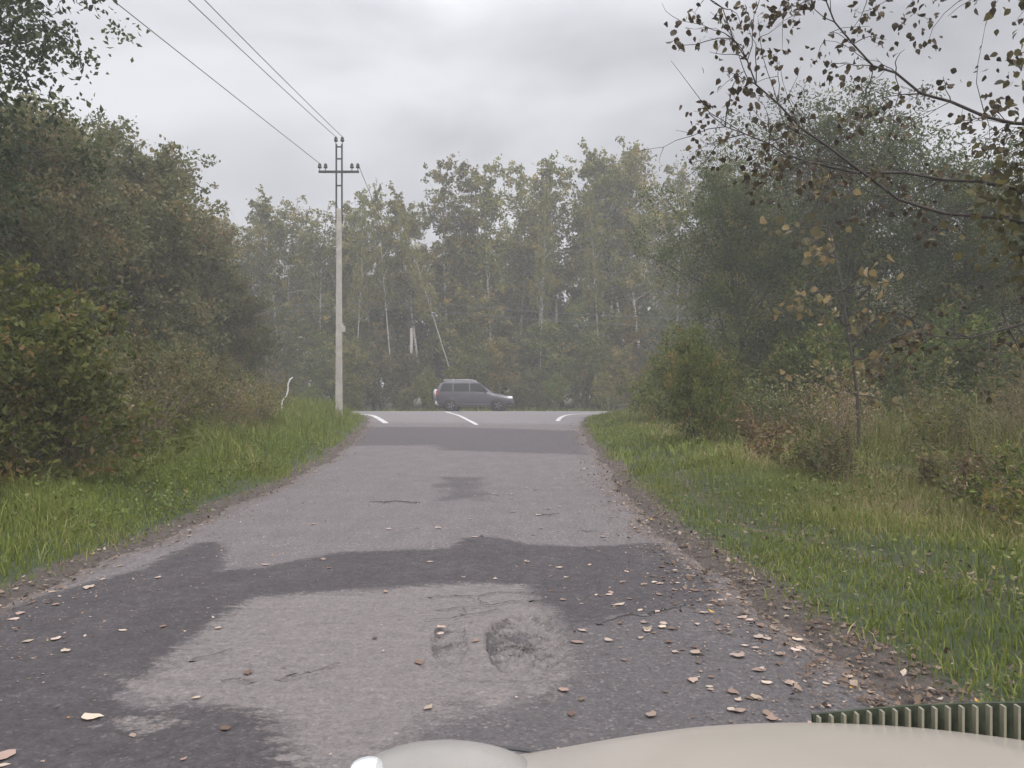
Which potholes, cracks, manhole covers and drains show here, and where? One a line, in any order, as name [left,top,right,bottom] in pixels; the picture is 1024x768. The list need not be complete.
pothole [474,609,582,681]
crack [185,647,339,685]
pothole [419,620,477,674]
crack [595,603,691,625]
crack [422,590,539,622]
